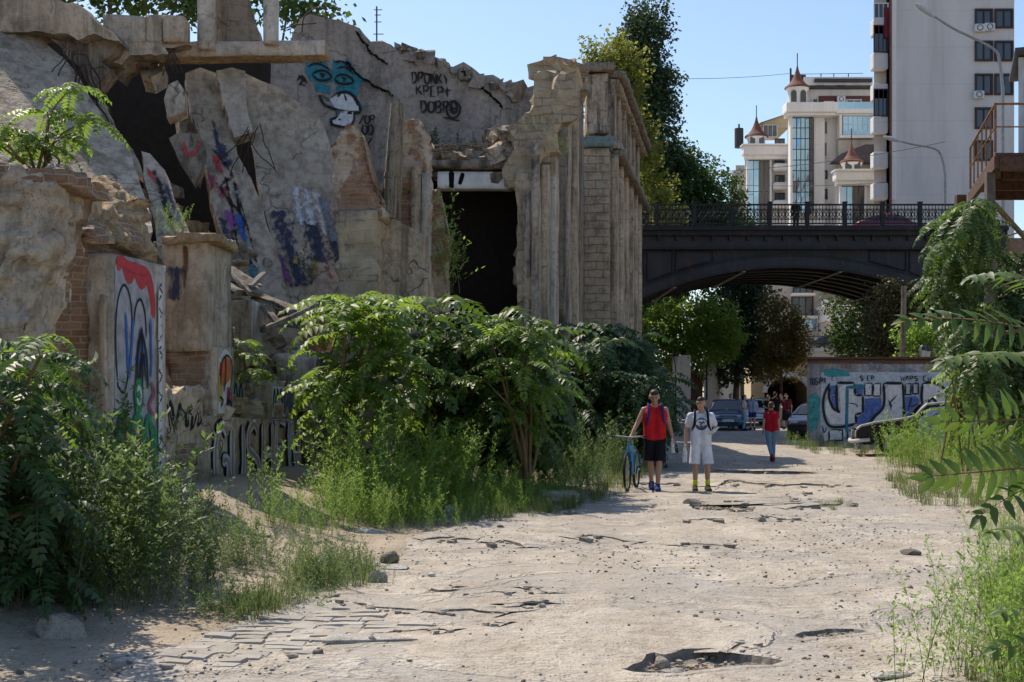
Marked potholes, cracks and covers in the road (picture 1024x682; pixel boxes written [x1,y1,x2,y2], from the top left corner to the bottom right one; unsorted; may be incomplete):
crack [407,533,737,549]
pothole [608,646,795,677]
crack [579,469,860,523]
pothole [781,627,879,642]
pothole [677,500,767,514]
crack [335,585,568,636]
